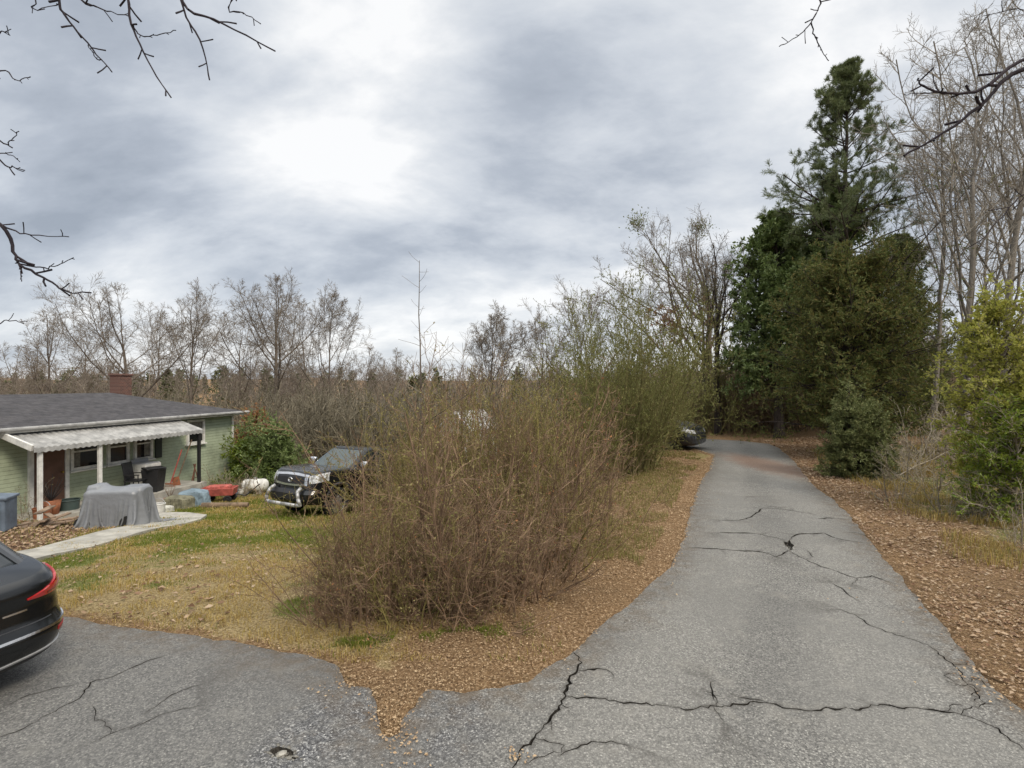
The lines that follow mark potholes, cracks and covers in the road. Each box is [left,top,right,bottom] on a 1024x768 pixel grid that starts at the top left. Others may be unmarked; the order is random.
crack [512,496,1021,768]
pothole [264,743,303,761]
crack [1,657,198,740]
